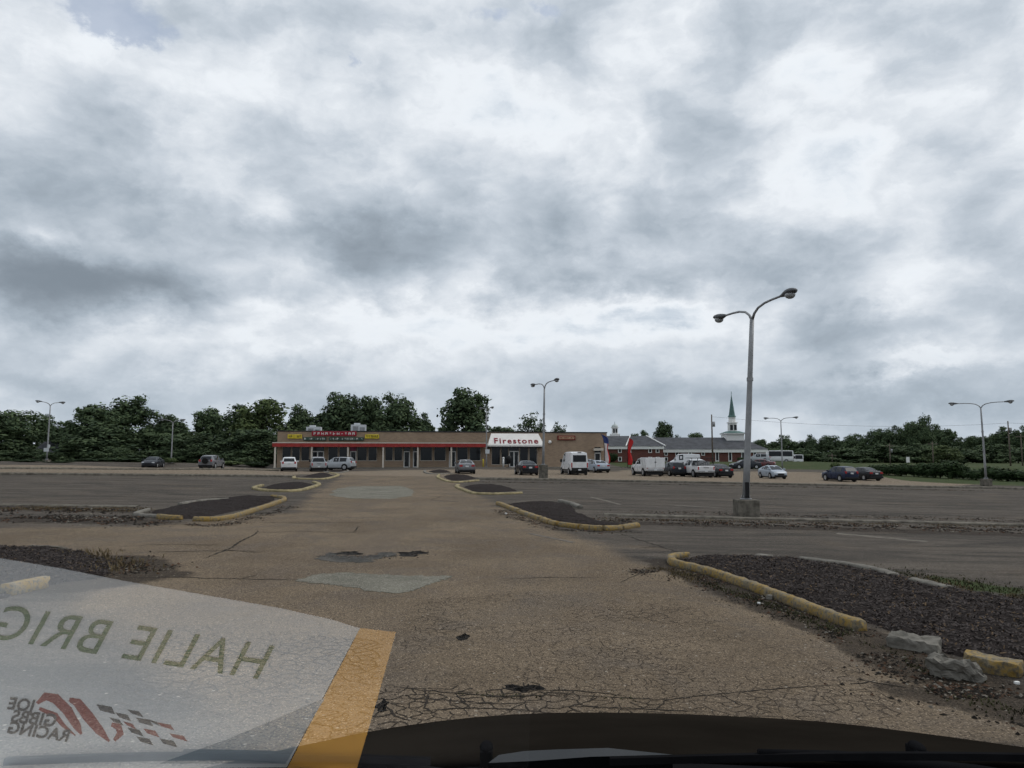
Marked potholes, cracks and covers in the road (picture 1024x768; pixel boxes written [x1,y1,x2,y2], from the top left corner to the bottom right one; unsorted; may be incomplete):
crack [108,522,364,557]
pothole [504,684,545,693]
crack [364,623,905,731]
